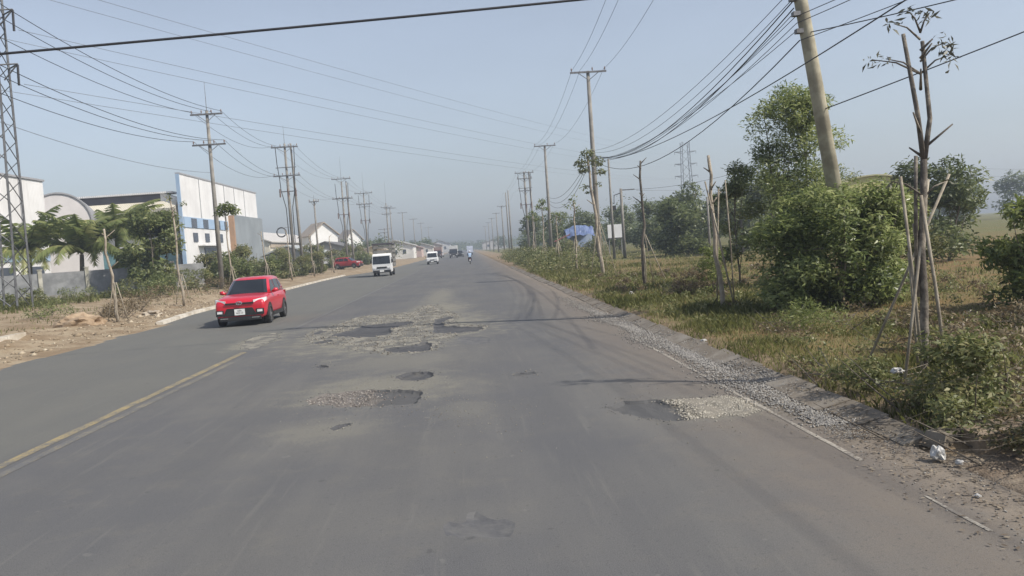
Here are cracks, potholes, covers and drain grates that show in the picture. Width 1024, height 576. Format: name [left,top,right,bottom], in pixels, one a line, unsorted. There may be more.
pothole [329,321,414,338]
pothole [306,389,423,408]
pothole [396,371,434,380]
pothole [384,342,432,353]
pothole [606,396,761,421]
pothole [433,317,483,333]
